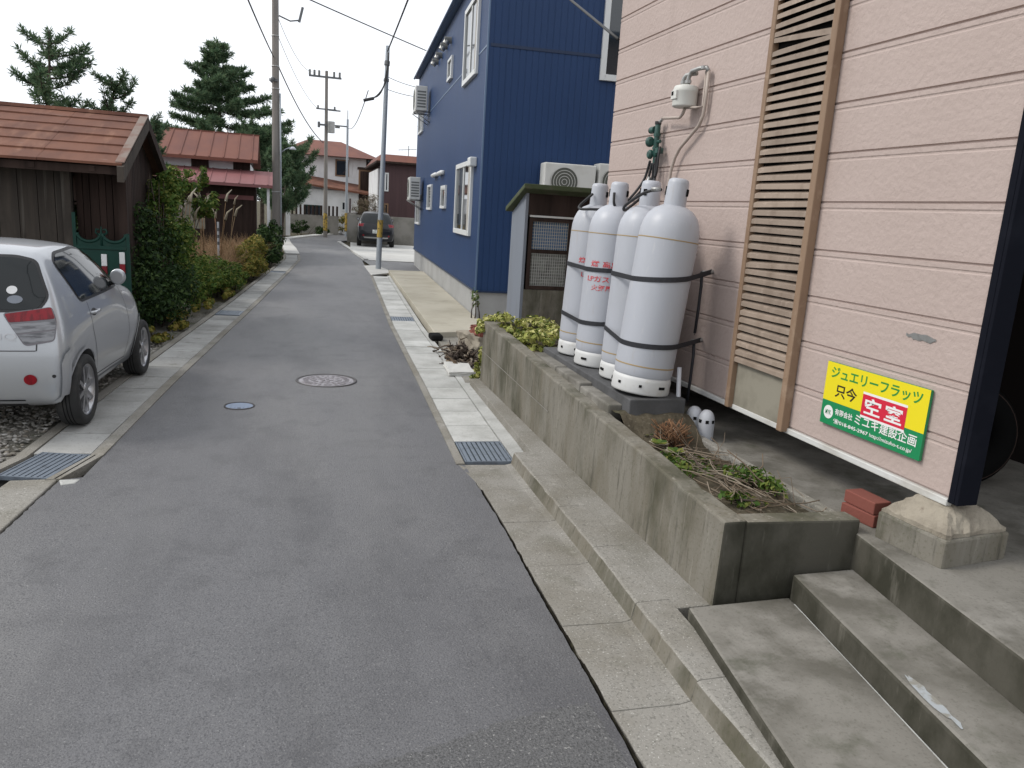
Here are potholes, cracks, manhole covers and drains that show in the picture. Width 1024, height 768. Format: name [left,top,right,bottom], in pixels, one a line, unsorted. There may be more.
drain grate [0,452,94,481]
drain grate [455,441,512,465]
manhole cover [224,402,255,410]
manhole cover [295,374,357,387]
